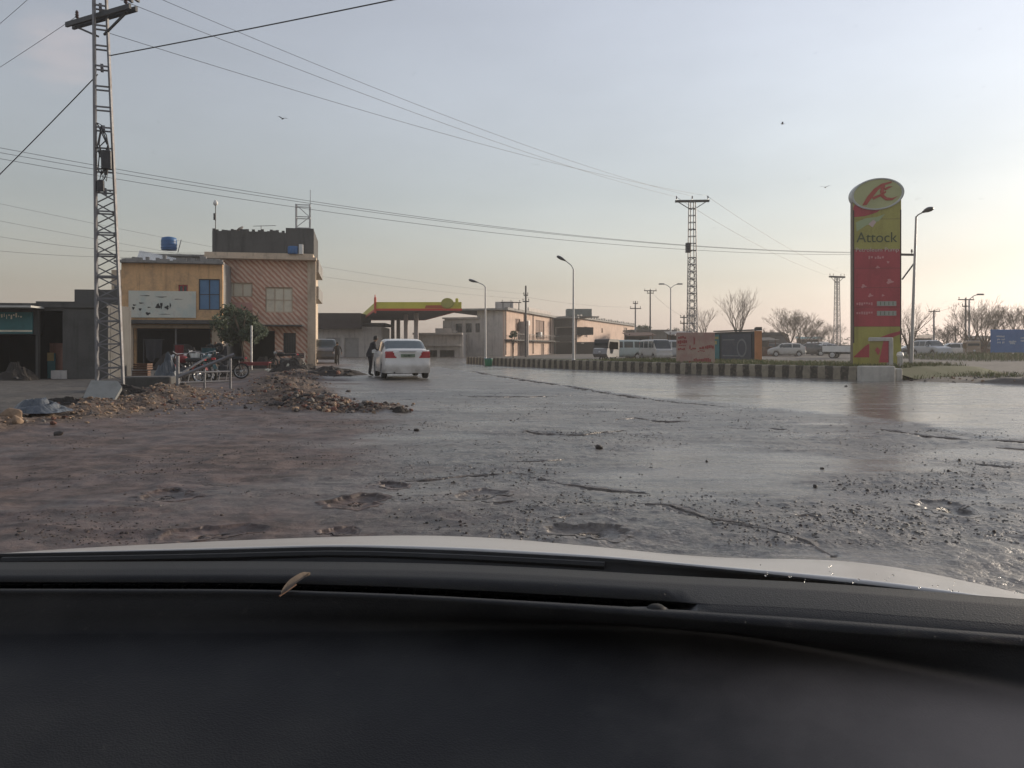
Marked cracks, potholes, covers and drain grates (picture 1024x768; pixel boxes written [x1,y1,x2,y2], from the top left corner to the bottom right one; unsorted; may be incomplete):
pothole [150,522,279,544]
crack [509,459,834,557]
pothole [129,486,206,502]
pothole [316,525,360,536]
crack [872,428,1024,468]
pothole [908,498,982,519]
pothole [536,521,639,542]
pothole [316,492,392,511]
pothole [448,487,515,501]
pothole [376,480,412,490]
